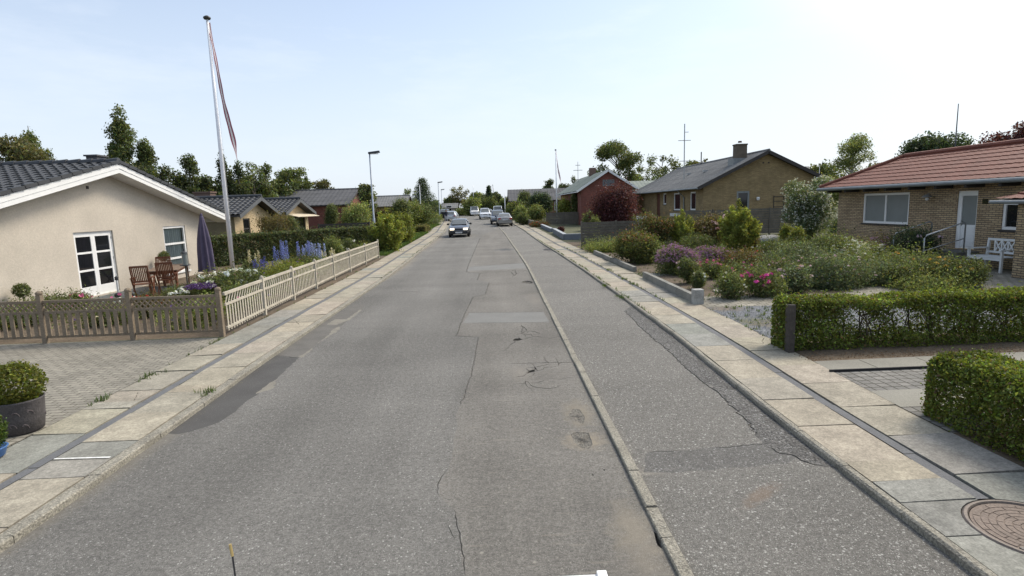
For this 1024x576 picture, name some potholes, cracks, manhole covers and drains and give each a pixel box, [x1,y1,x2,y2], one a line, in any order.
crack [501,312,554,351]
manhole cover [961,500,1024,554]
pothole [566,409,585,424]
crack [626,311,826,467]
crack [510,360,573,389]
pothole [571,432,592,449]
